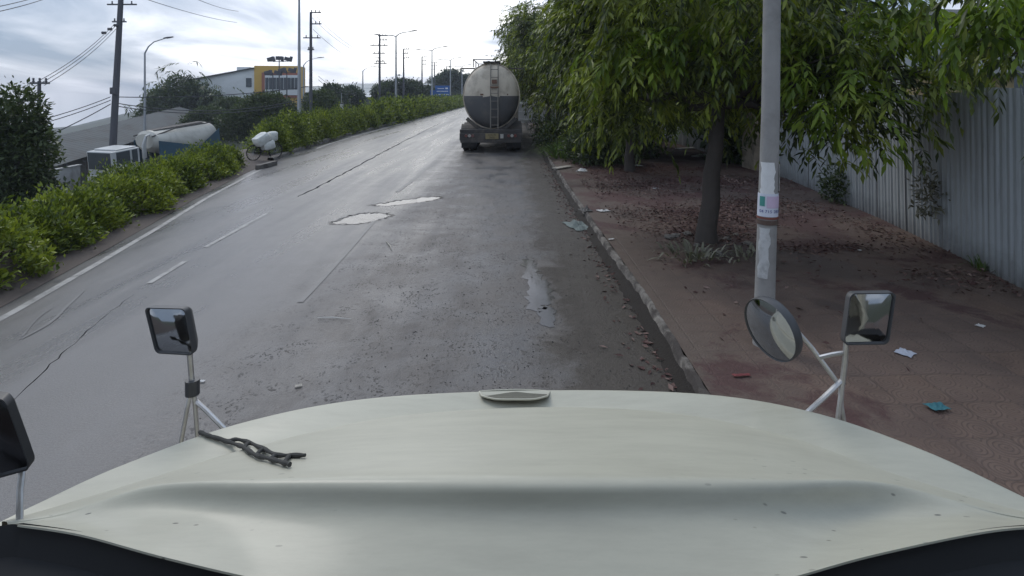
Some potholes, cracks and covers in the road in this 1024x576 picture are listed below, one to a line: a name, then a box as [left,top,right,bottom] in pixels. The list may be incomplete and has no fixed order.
crack [15,295,133,399]
